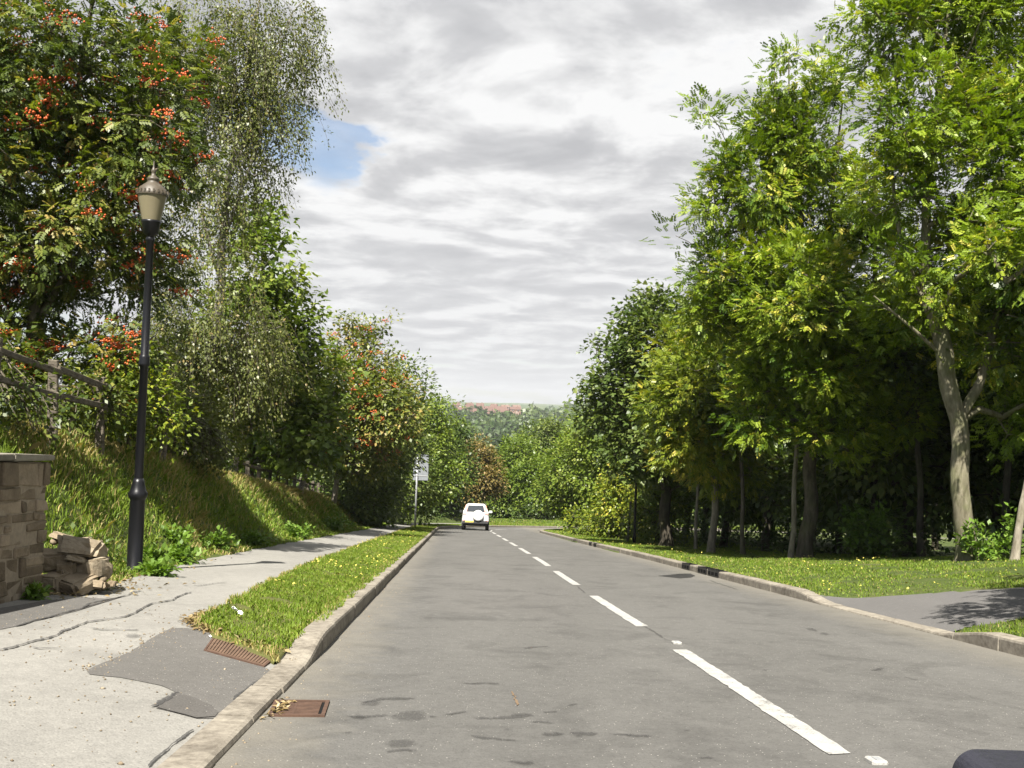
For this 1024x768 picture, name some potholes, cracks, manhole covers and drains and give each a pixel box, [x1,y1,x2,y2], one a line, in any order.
crack [3,582,223,649]
drain grate [268,699,330,717]
